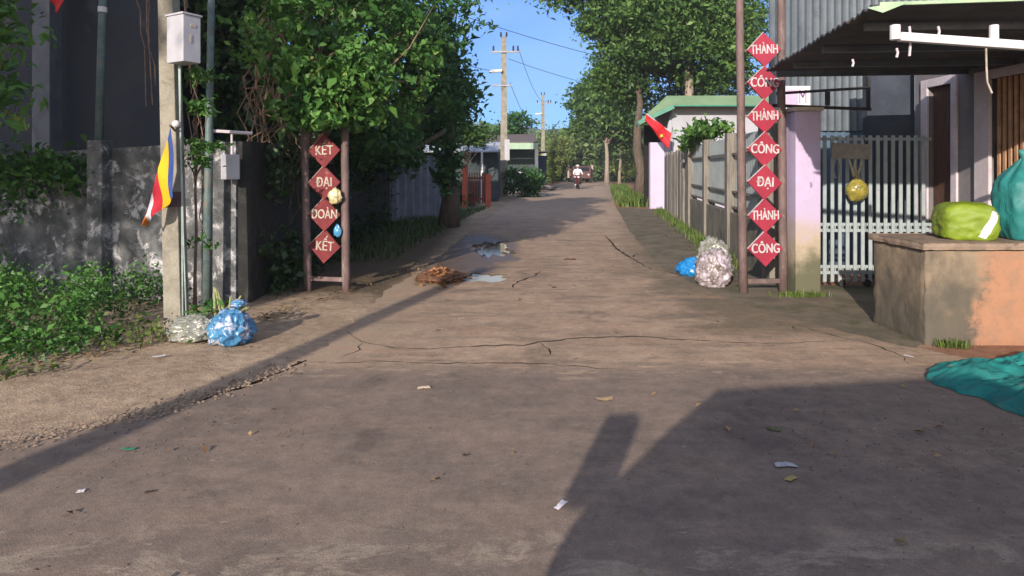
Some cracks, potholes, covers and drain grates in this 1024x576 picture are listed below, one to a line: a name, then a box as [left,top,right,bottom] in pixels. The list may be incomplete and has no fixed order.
pothole [472,241,516,257]
crack [343,327,908,363]
crack [604,235,678,274]
pothole [463,272,509,282]
